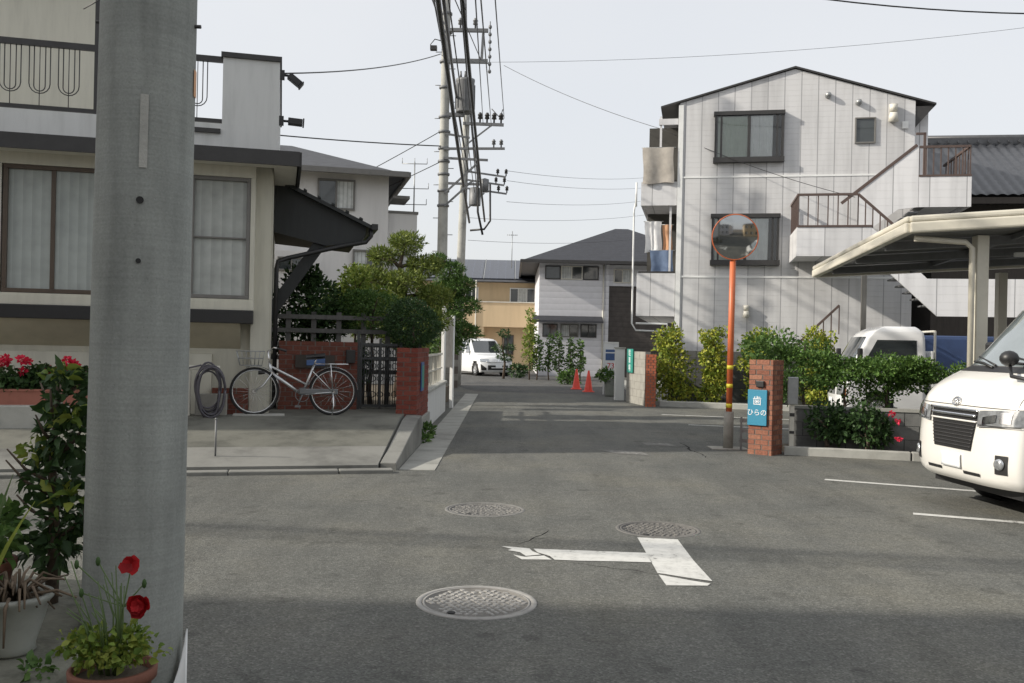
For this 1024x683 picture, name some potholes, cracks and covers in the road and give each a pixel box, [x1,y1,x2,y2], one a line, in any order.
manhole cover [445,502,525,517]
manhole cover [615,521,701,538]
manhole cover [416,585,537,620]
